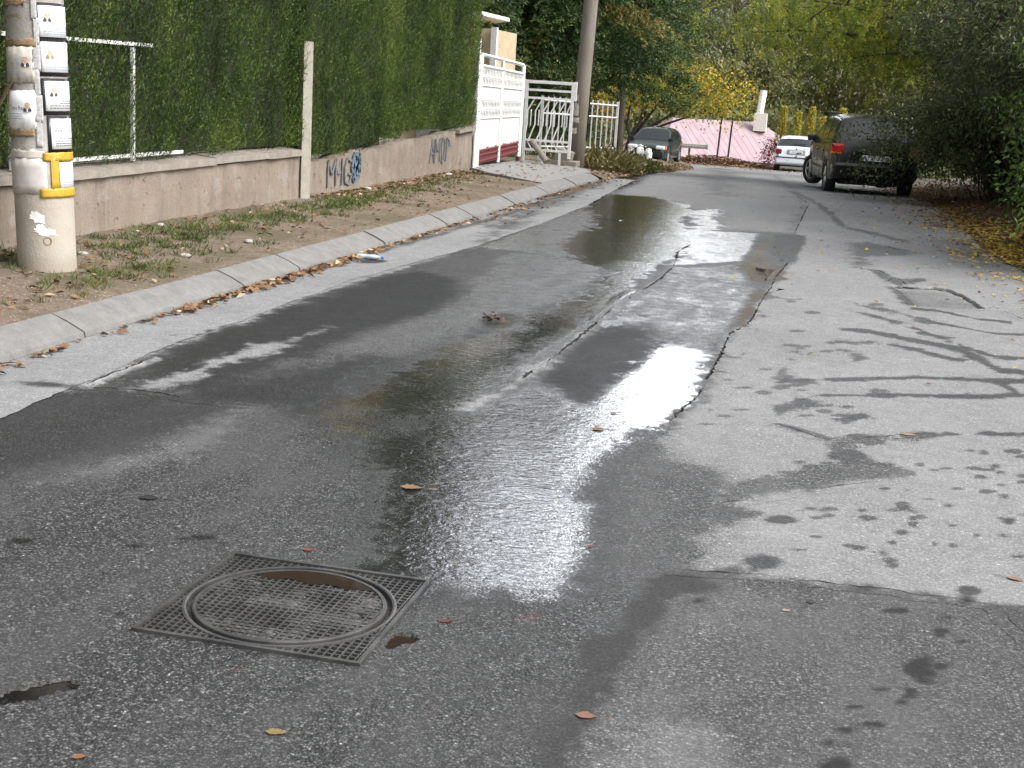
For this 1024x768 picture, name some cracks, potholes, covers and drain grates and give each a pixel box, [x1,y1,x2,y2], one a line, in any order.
crack [477,244,934,443]
pothole [743,267,791,282]
manhole cover [131,551,432,667]
crack [668,191,813,234]
pothole [0,671,101,714]
